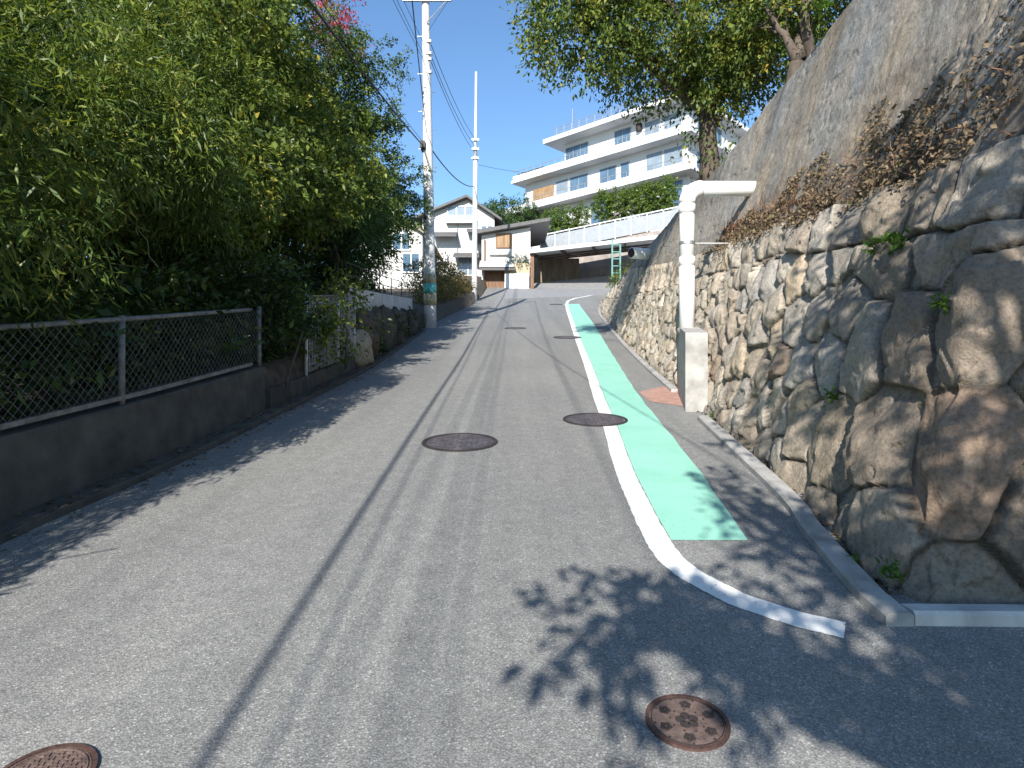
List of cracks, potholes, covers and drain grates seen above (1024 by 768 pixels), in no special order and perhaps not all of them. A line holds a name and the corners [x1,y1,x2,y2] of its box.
manhole cover [563,413,628,427]
manhole cover [645,694,731,752]
manhole cover [3,743,98,768]
manhole cover [422,433,498,452]
